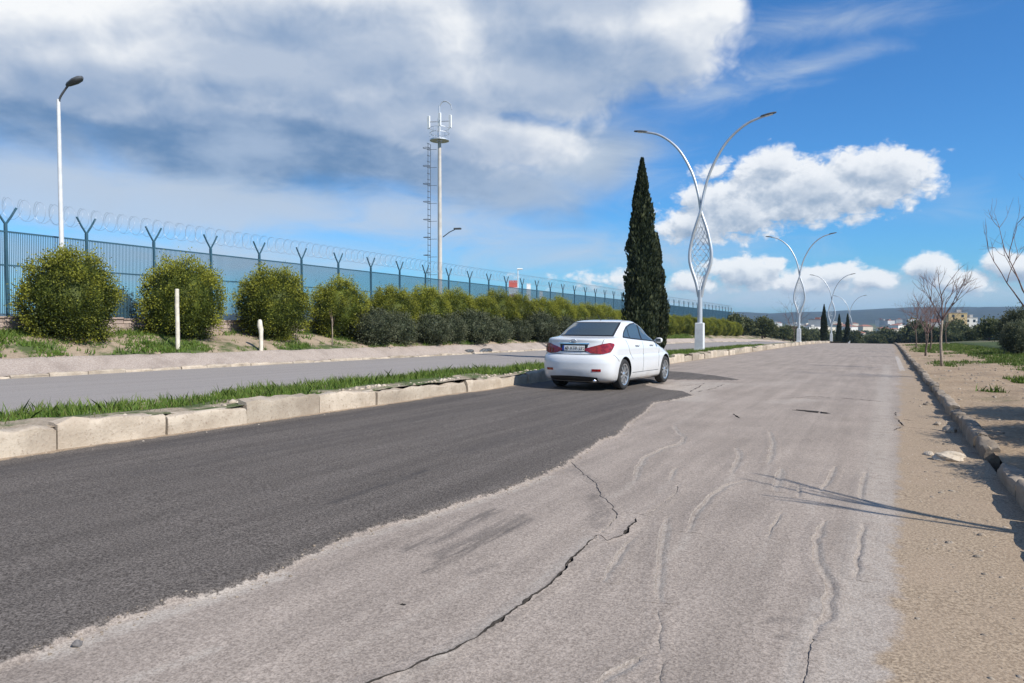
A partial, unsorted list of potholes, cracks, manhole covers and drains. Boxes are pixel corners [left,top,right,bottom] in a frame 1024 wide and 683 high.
crack [341,413,878,683]
